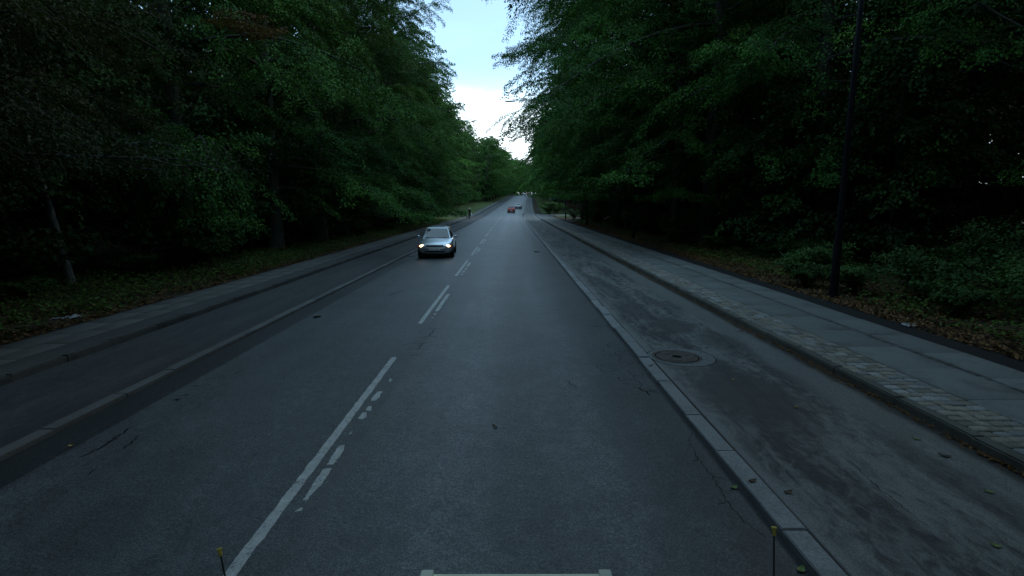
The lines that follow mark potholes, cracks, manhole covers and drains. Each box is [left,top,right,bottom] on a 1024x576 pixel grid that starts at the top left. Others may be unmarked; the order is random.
crack [79,427,139,475]
crack [688,433,762,534]
manhole cover [647,348,717,367]
crack [596,342,657,396]
